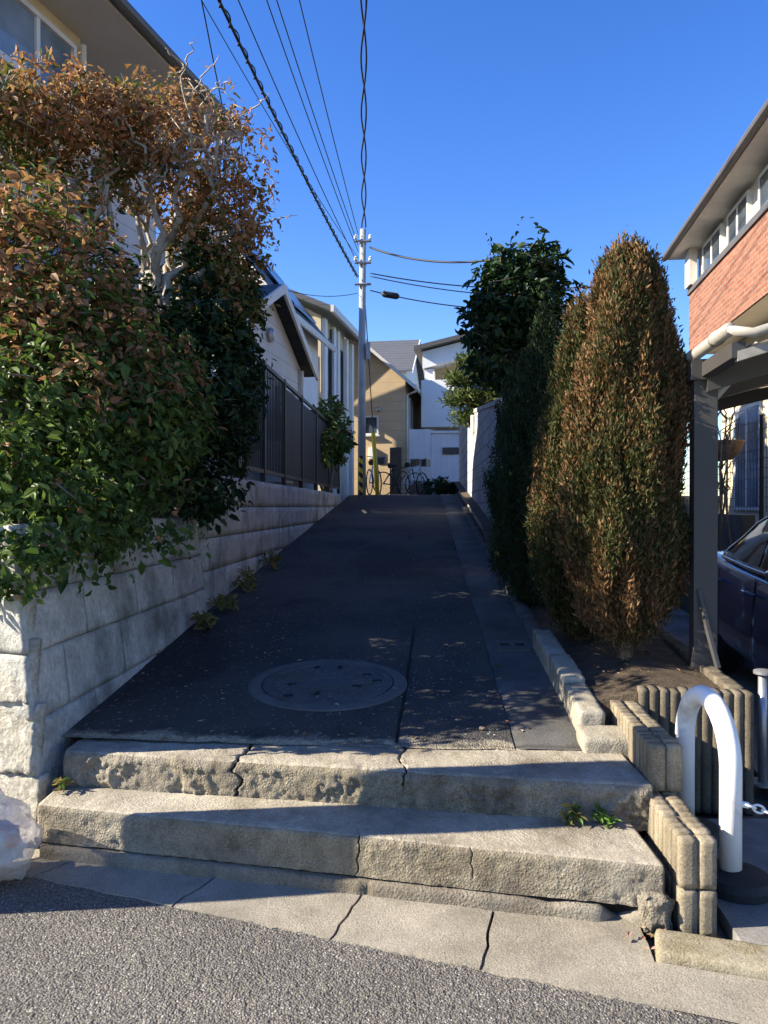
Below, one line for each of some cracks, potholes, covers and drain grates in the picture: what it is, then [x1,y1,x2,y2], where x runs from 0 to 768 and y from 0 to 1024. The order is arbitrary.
crack [396,626,415,785]
crack [231,746,252,796]
manhole cover [248,659,407,712]
